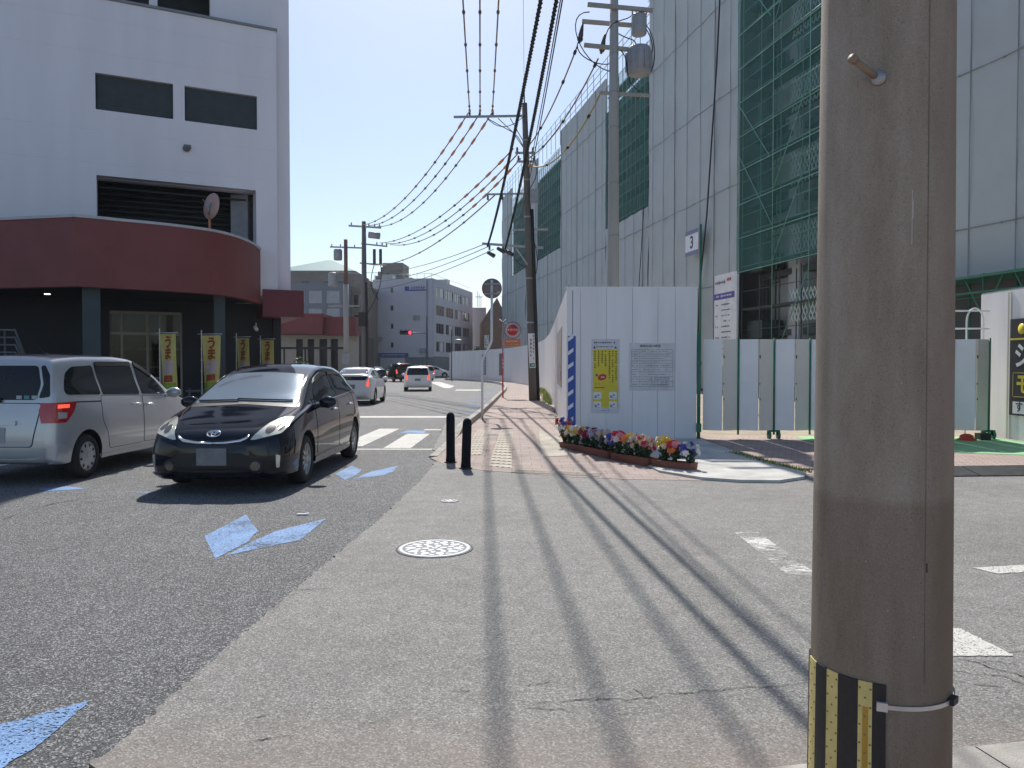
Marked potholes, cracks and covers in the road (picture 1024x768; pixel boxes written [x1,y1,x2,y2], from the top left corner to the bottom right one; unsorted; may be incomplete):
crack [954,651,1024,687]
manhole cover [396,539,473,558]
crack [508,681,805,714]
